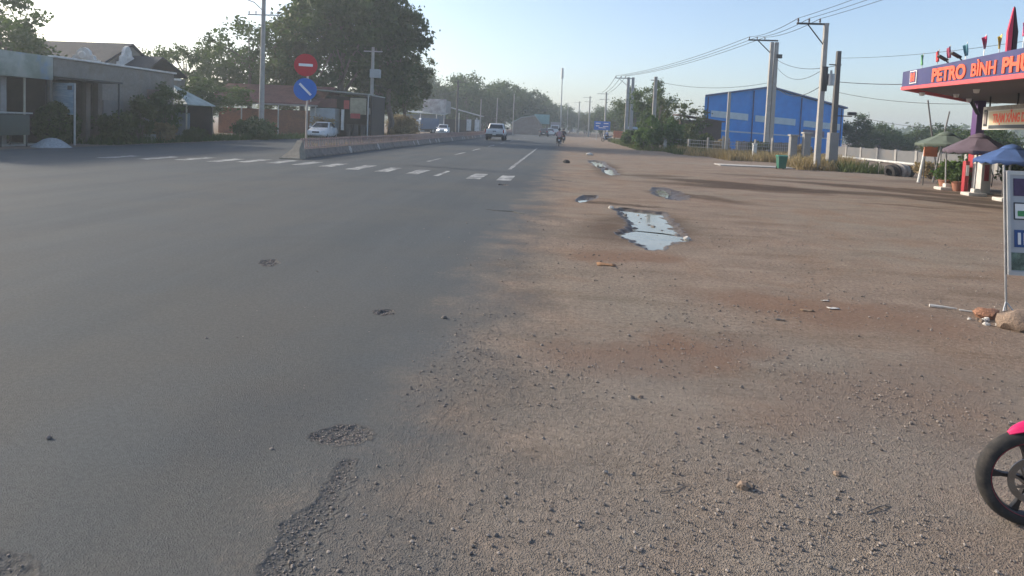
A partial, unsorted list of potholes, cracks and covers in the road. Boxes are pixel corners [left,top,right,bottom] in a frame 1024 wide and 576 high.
pothole [586,160,620,176]
pothole [613,207,692,251]
pothole [647,187,692,201]
pothole [305,423,377,447]
pothole [575,195,599,203]
pothole [257,259,281,267]
pothole [254,457,359,576]
